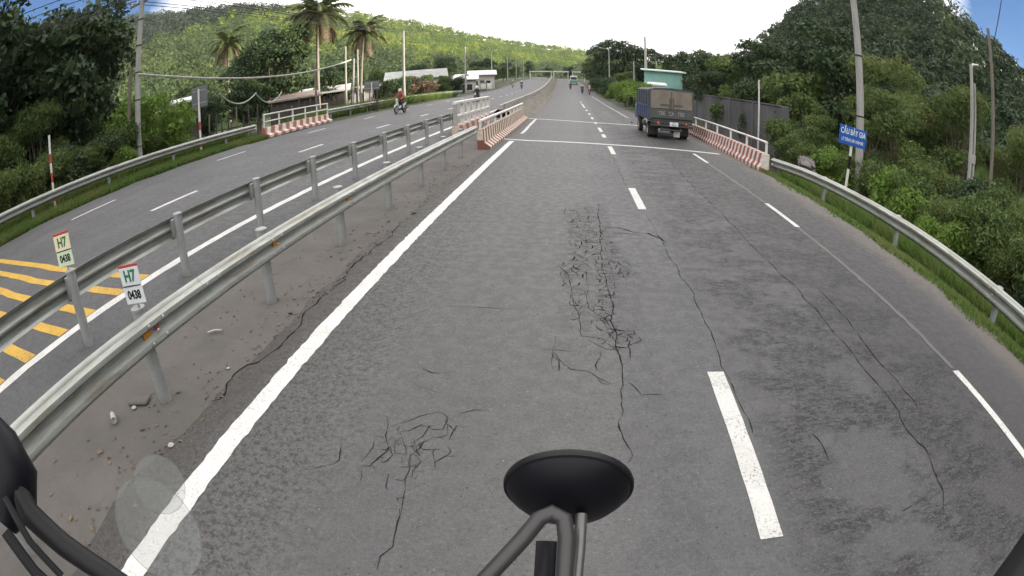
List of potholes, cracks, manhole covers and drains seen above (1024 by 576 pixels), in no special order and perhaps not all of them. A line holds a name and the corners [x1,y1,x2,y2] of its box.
crack [551,158,753,462]
crack [311,410,490,569]
crack [673,166,944,508]
